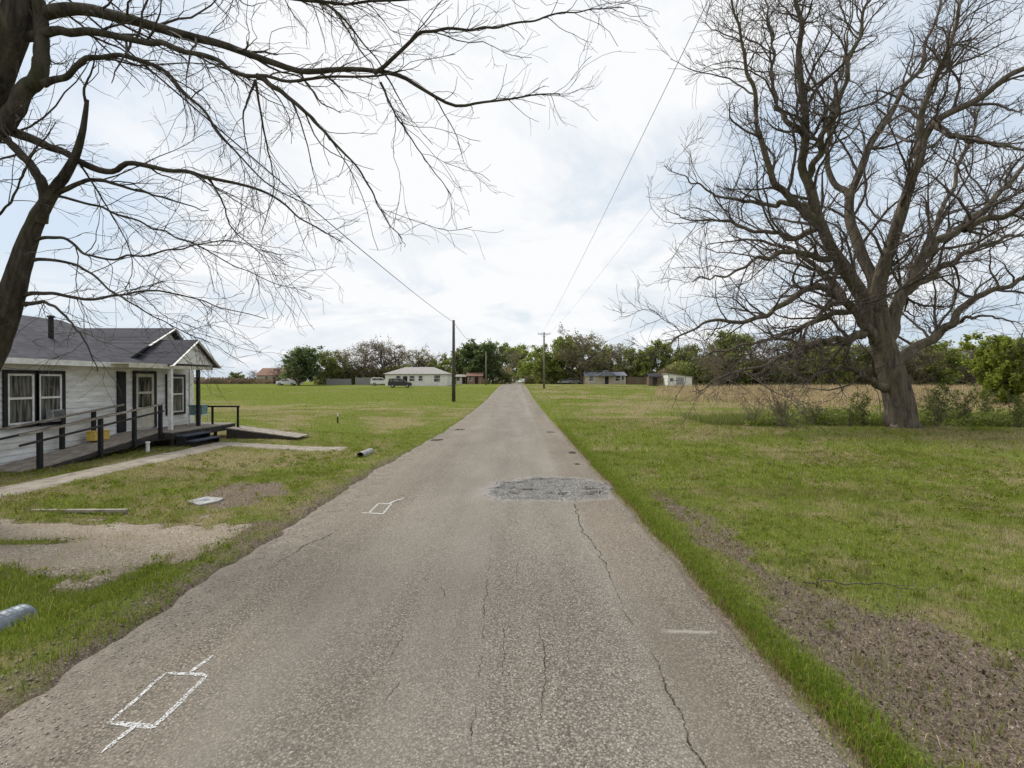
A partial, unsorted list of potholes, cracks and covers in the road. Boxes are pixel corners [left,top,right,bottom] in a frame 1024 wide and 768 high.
crack [470,547,491,758]
crack [536,629,547,750]
crack [574,504,707,768]
